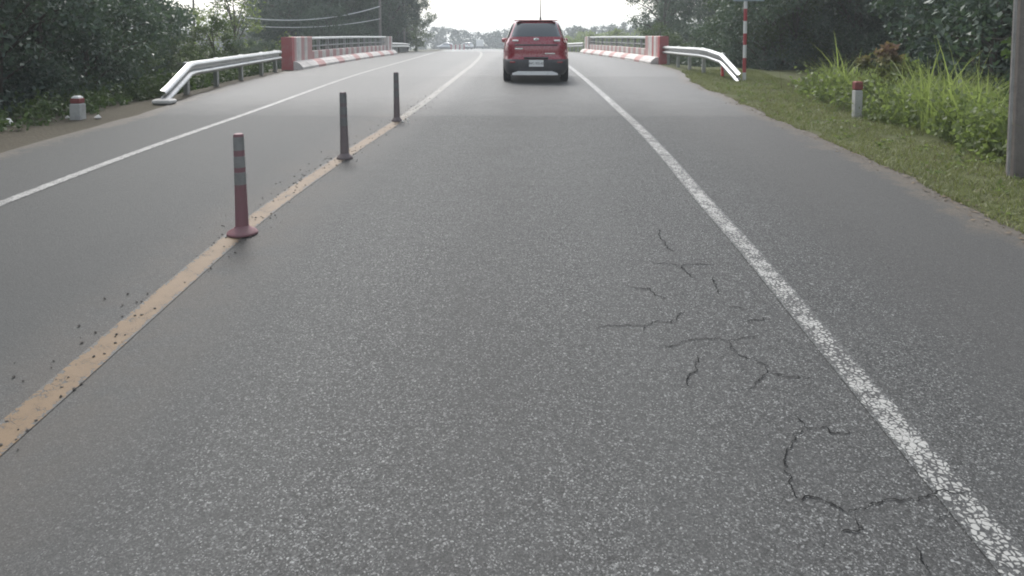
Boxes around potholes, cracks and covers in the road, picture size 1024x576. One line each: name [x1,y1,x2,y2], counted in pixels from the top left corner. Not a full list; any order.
crack [653,229,815,389]
crack [783,414,969,547]
crack [599,285,683,331]
